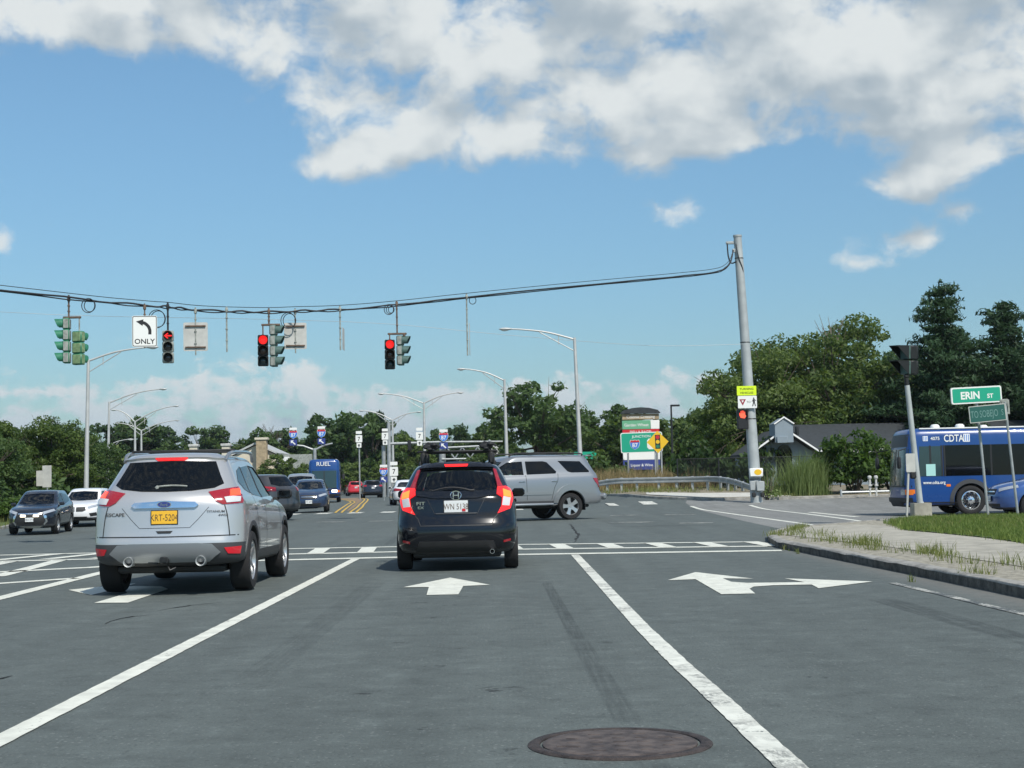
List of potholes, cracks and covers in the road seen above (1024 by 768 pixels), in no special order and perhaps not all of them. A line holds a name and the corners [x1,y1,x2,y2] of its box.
manhole cover [528,727,713,761]
